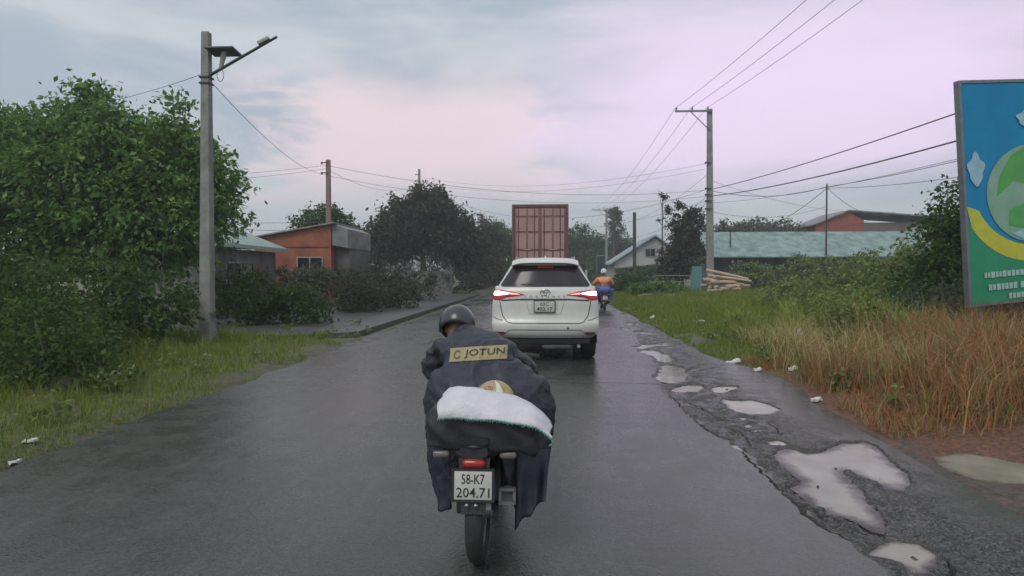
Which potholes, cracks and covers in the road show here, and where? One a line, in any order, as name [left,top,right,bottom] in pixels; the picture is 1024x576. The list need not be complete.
pothole [710,385,740,393]
pothole [766,438,788,446]
pothole [651,363,692,384]
pothole [638,350,679,363]
crack [548,382,849,541]
pothole [721,399,782,415]
pothole [862,540,943,576]
pothole [771,440,914,537]
pothole [666,382,705,393]
